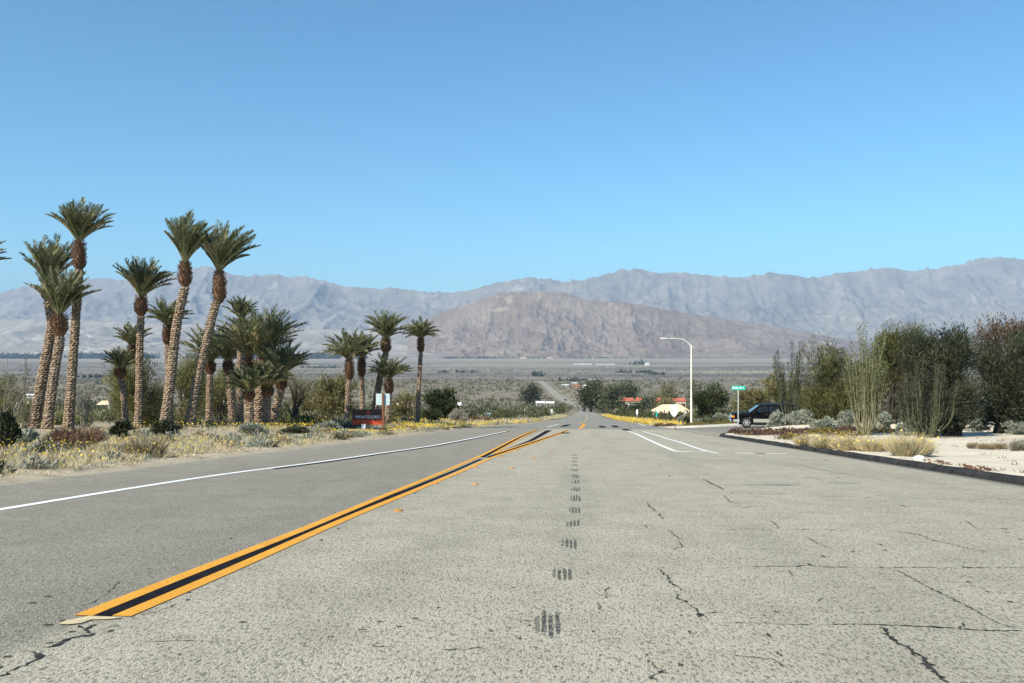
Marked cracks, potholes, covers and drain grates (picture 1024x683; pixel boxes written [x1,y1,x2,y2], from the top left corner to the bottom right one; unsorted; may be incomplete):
crack [835,531,1023,683]
crack [657,567,802,625]
crack [0,623,99,676]
